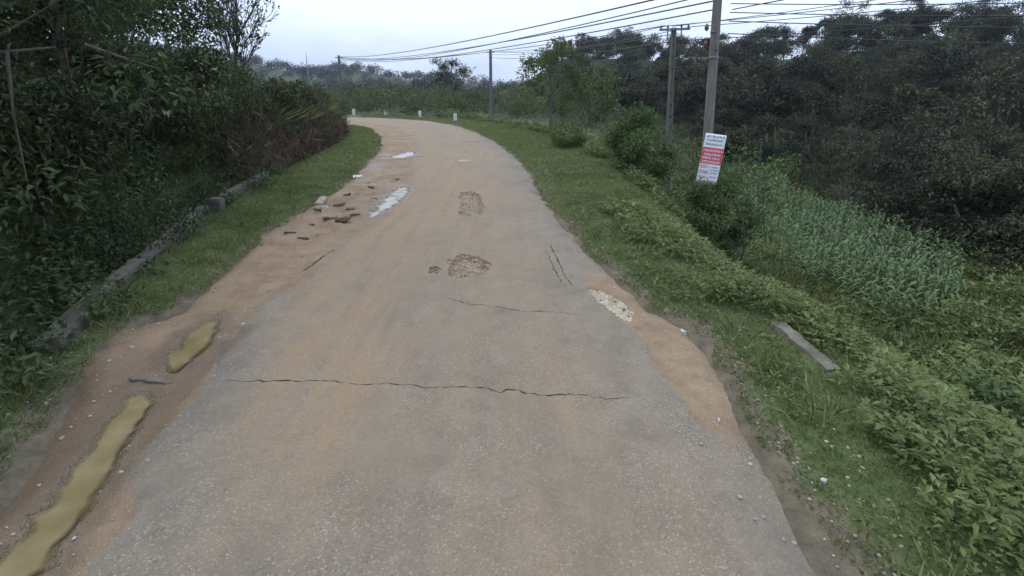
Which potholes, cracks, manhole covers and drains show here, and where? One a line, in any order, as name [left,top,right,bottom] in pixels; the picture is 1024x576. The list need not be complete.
crack [449,298,582,315]
crack [217,379,635,400]
pothole [589,289,635,322]
pothole [446,254,492,278]
crack [545,245,574,287]
pothole [0,389,162,576]
pothole [162,317,224,374]
pothole [457,191,486,216]
pothole [367,185,412,217]
